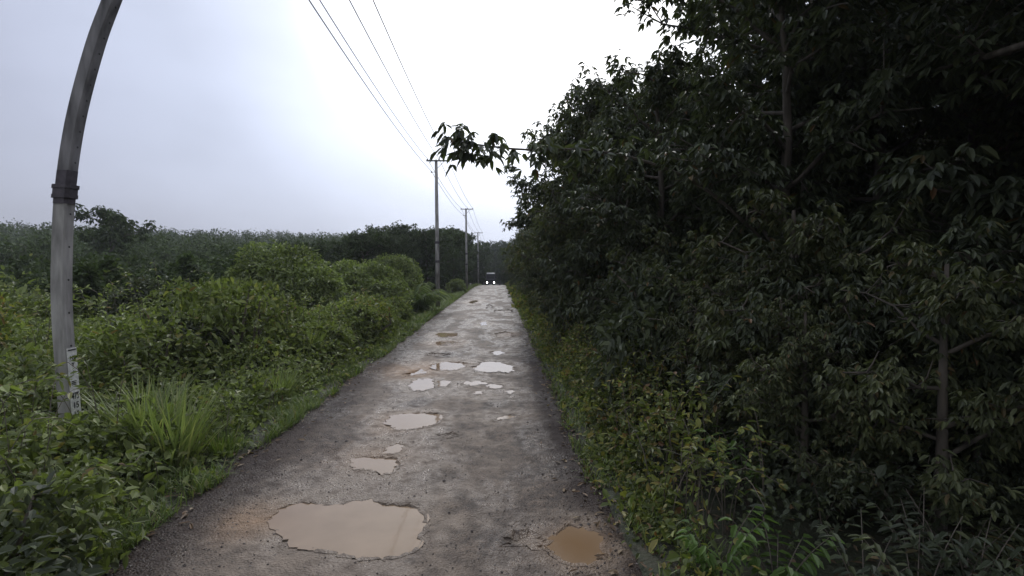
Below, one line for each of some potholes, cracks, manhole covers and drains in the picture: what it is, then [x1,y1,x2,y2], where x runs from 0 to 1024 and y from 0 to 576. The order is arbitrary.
pothole [349,455,405,477]
pothole [382,411,447,431]
pothole [540,521,609,568]
pothole [380,442,408,455]
pothole [266,497,431,562]
pothole [408,378,437,391]
pothole [468,361,519,373]
pothole [430,361,469,371]
